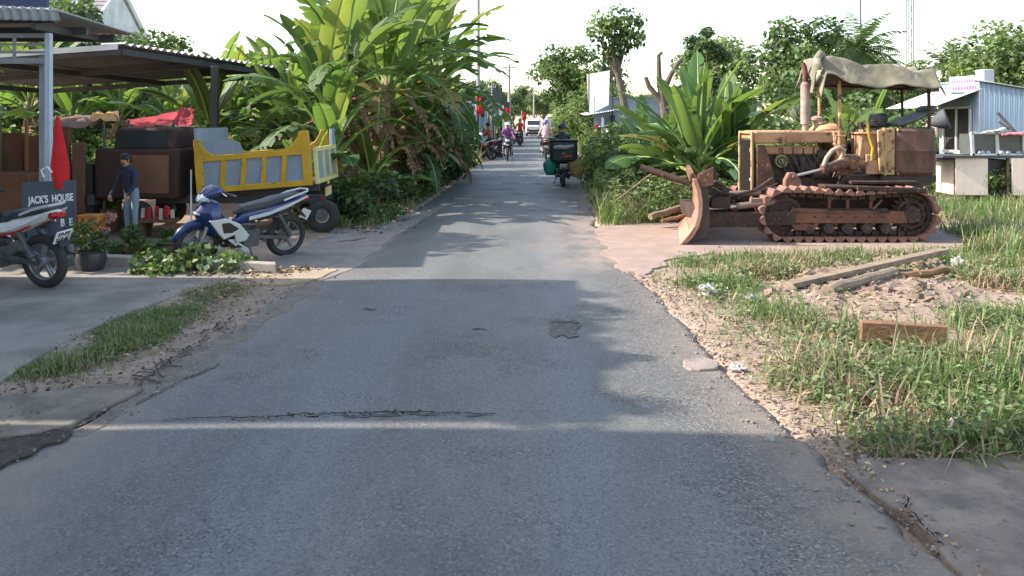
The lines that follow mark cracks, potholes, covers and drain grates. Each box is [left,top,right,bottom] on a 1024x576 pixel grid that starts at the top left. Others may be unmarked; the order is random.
crack [75,315,496,426]
crack [901,493,940,542]
